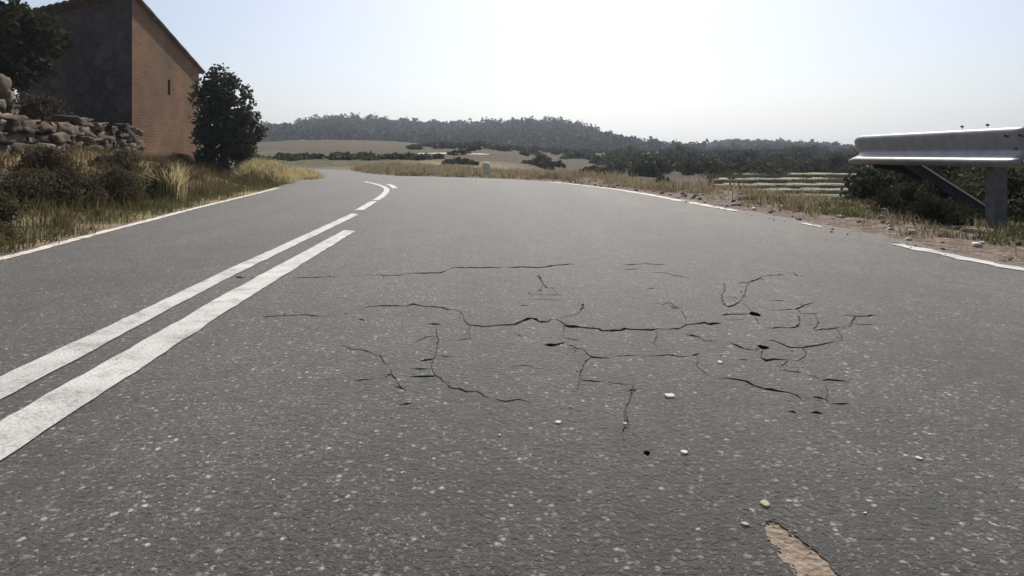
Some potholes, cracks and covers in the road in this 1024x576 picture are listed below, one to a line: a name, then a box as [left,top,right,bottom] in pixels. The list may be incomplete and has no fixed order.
pothole [765,521,840,576]
crack [237,263,874,414]
crack [622,386,635,444]
